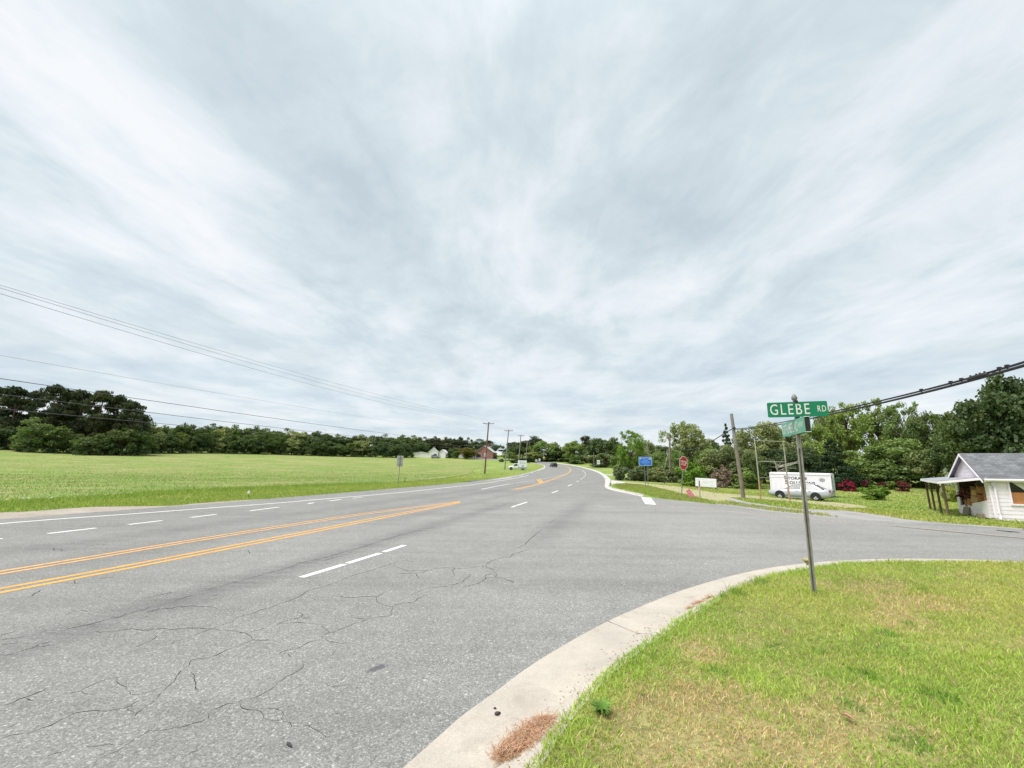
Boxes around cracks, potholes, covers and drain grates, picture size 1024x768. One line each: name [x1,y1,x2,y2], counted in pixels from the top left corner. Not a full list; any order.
crack [2,519,556,765]
